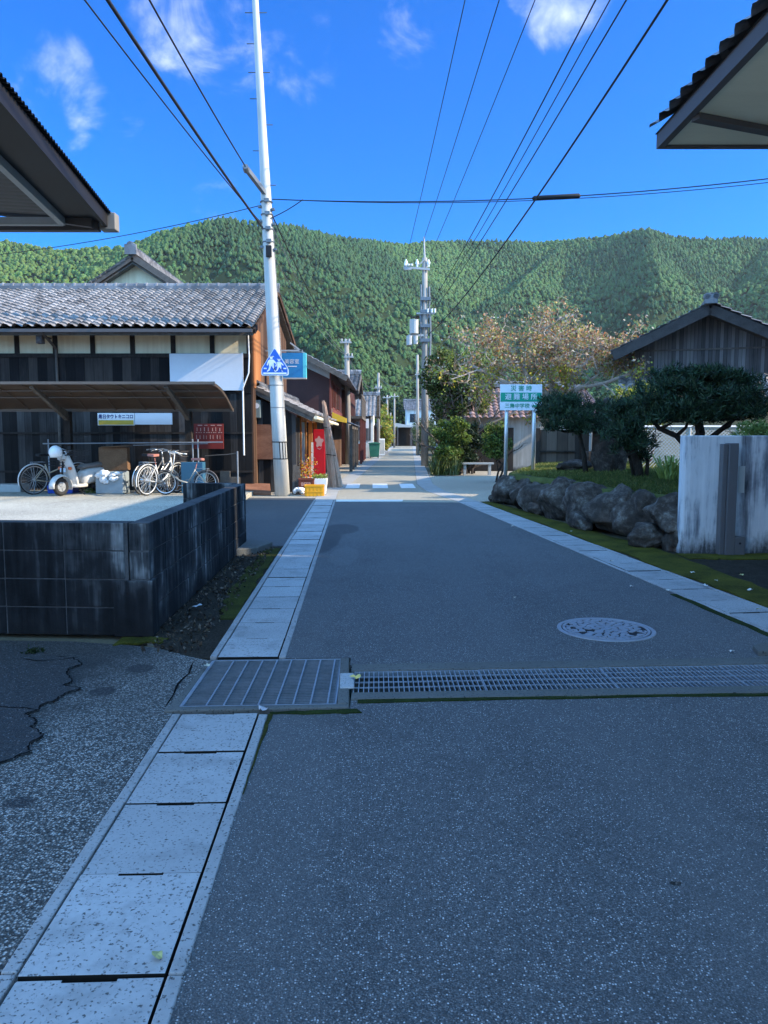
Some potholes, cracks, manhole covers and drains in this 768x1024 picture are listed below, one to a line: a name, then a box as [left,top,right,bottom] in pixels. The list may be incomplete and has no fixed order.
manhole cover [557,618,656,642]
drain grate [599,666,748,688]
drain grate [353,670,486,692]
drain grate [179,659,341,707]
crack [0,656,82,762]
drain grate [478,668,618,690]
crack [165,662,193,707]
drain grate [718,664,768,686]
